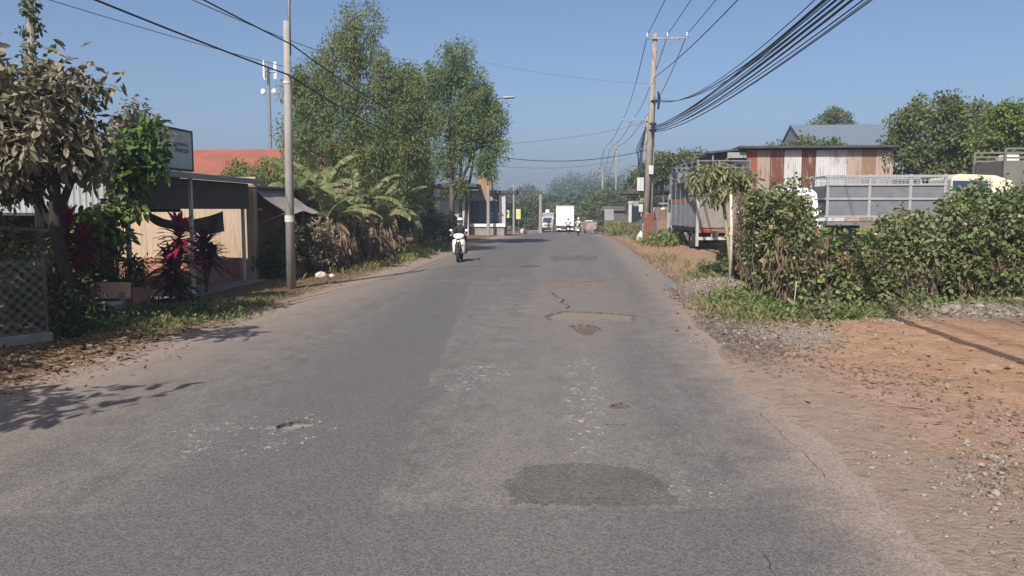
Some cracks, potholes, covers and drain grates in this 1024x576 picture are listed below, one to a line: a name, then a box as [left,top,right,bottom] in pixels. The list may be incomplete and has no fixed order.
pothole [275,419,322,430]
crack [545,281,605,309]
pothole [569,324,603,335]
